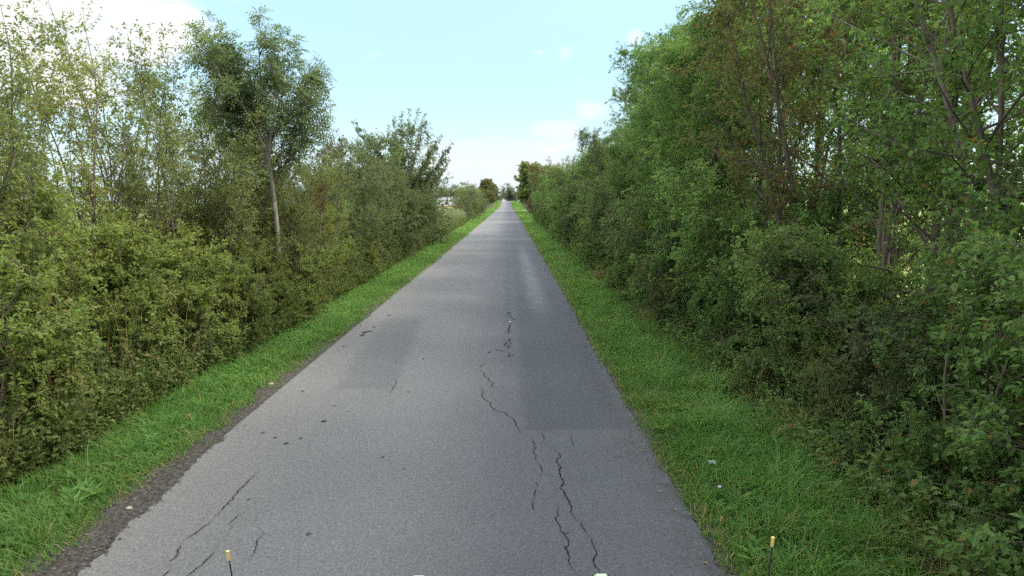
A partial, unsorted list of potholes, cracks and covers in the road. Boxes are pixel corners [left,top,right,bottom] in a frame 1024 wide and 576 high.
crack [480,312,600,574]
crack [163,474,255,576]
